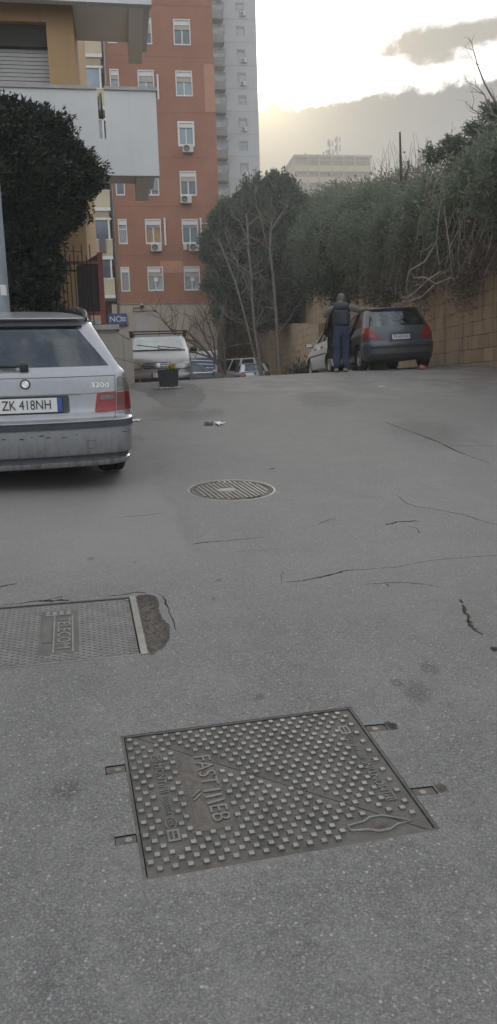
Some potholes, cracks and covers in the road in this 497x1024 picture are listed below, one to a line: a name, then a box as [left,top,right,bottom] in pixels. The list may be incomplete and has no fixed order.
crack [281,555,496,587]
manhole cover [106,707,439,880]
crack [386,495,496,533]
crack [386,422,485,462]
manhole cover [0,596,148,669]
manhole cover [187,479,276,501]
crack [459,599,483,635]
